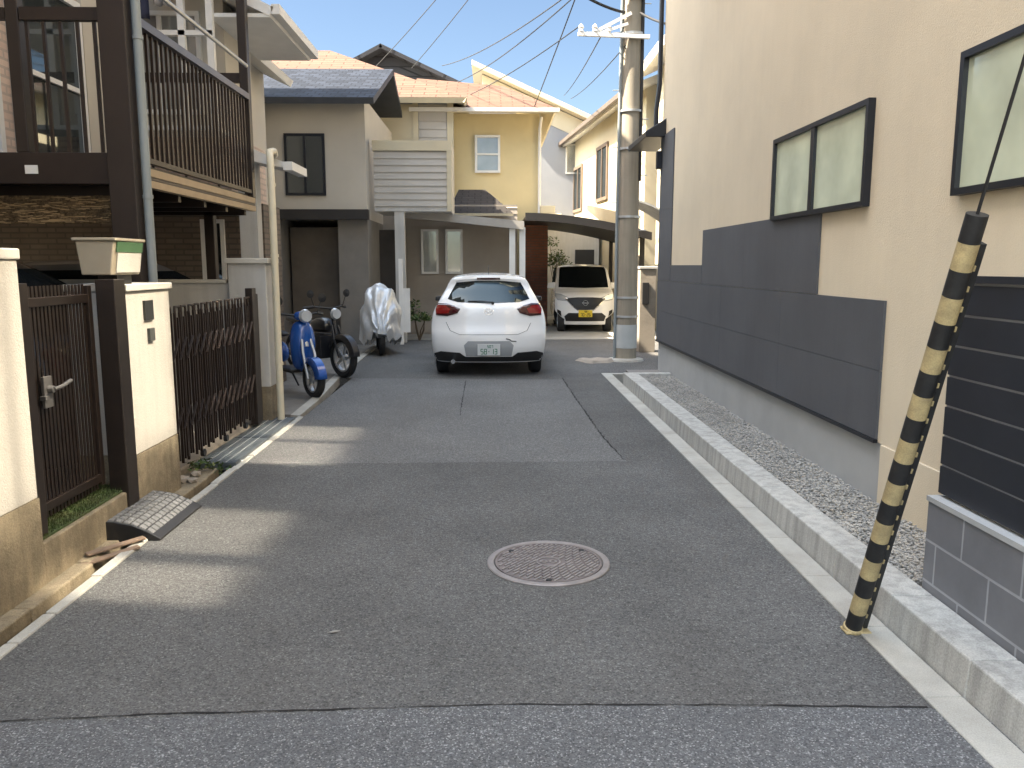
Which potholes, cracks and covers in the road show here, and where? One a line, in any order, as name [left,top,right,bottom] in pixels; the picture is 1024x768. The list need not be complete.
manhole cover [487,541,610,587]
drain grate [196,417,295,470]
